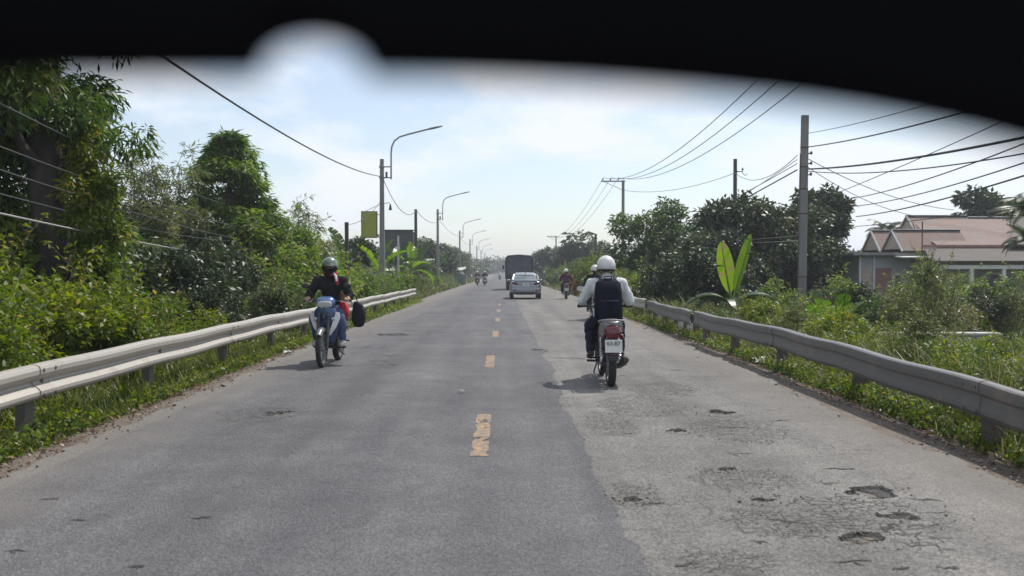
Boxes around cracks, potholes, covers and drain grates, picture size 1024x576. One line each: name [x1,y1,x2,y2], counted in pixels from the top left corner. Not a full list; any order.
crack [672,467,955,576]
pothole [821,529,909,551]
pothole [704,465,744,473]
pothole [735,495,794,507]
pothole [698,409,746,417]
pothole [859,509,955,526]
pothole [826,483,916,503]
pothole [611,494,653,506]
